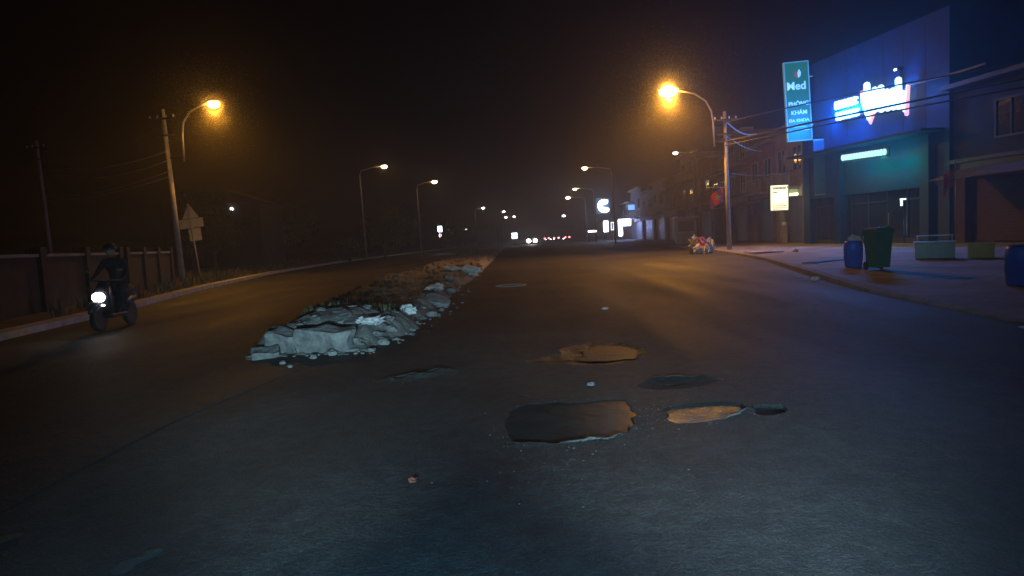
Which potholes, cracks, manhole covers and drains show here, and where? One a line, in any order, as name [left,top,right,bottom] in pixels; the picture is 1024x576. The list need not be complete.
pothole [525,343,646,365]
pothole [663,402,748,424]
pothole [503,400,638,444]
pothole [751,404,788,415]
pothole [637,375,721,390]
